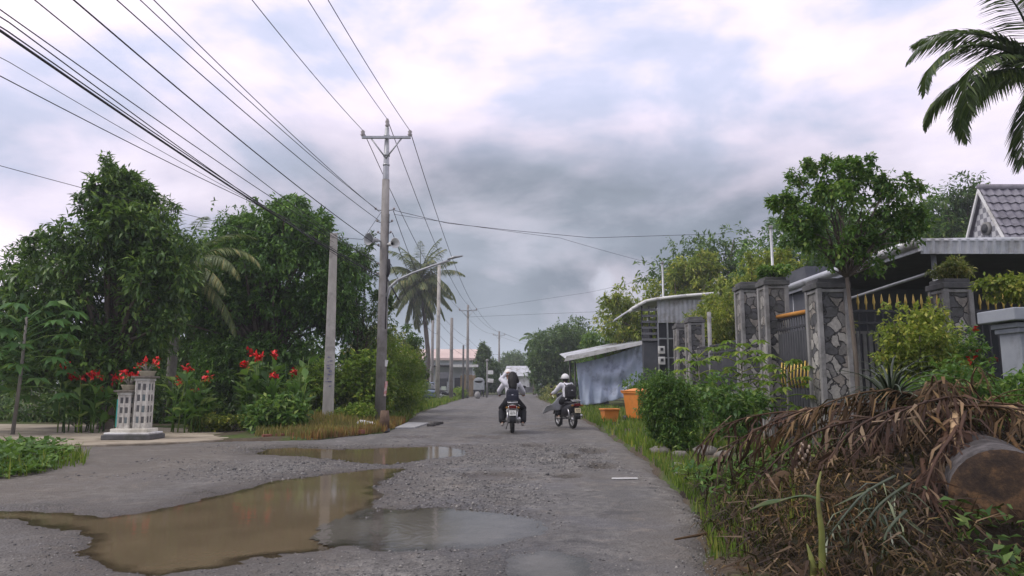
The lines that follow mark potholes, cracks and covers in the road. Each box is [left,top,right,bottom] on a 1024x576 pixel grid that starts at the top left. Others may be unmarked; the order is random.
pothole [348,504,554,552]
pothole [292,445,472,454]
pothole [0,466,410,576]
